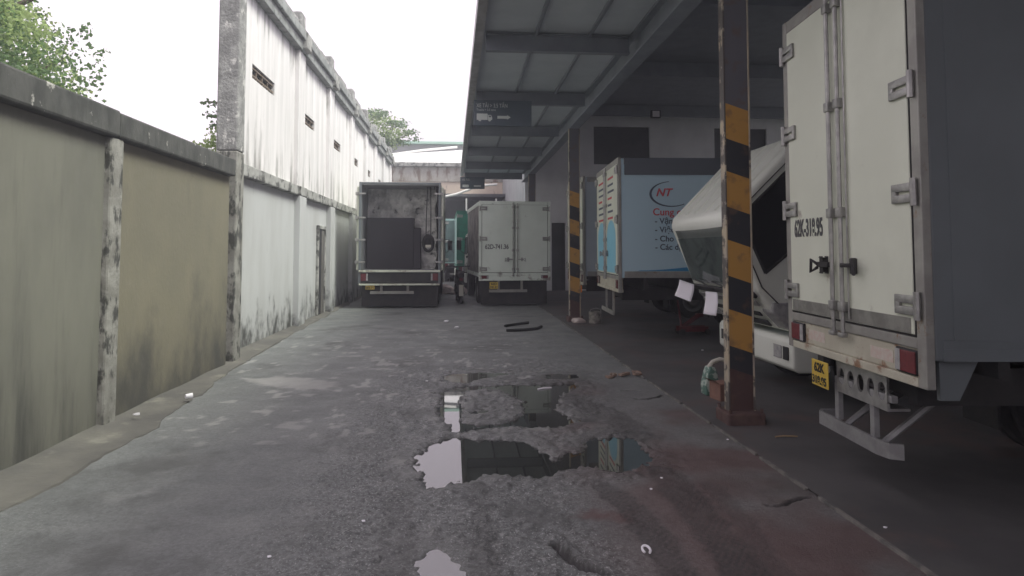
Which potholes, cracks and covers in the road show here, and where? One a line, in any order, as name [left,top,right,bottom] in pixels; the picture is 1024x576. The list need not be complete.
pothole [406,543,477,576]
crack [763,495,814,508]
pothole [404,432,661,490]
pothole [437,371,518,383]
pothole [430,381,584,433]
